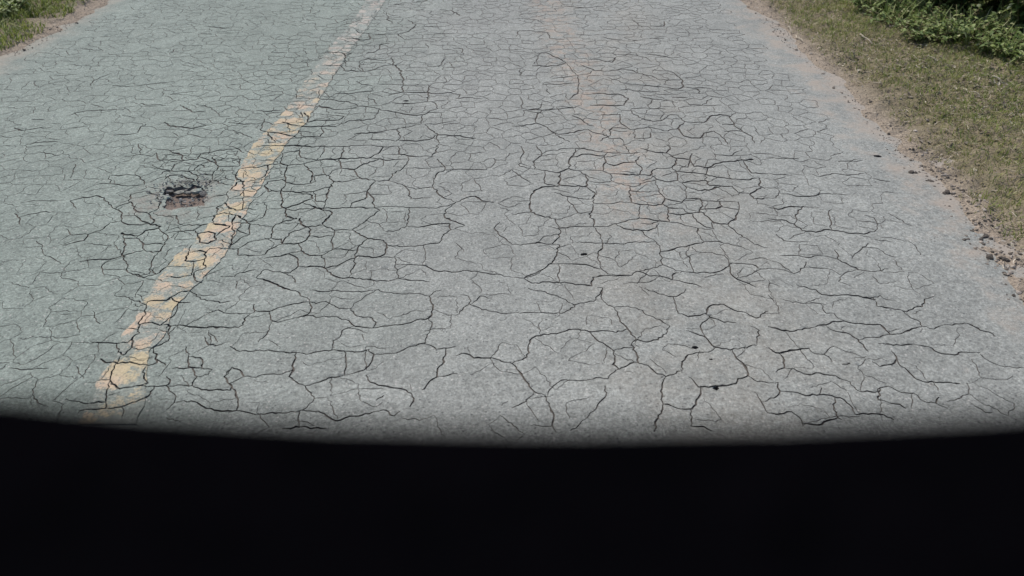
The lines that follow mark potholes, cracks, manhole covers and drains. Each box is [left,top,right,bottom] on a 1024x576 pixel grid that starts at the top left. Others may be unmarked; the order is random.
pothole [146,174,228,223]
crack [0,0,416,415]
crack [243,0,1022,425]
